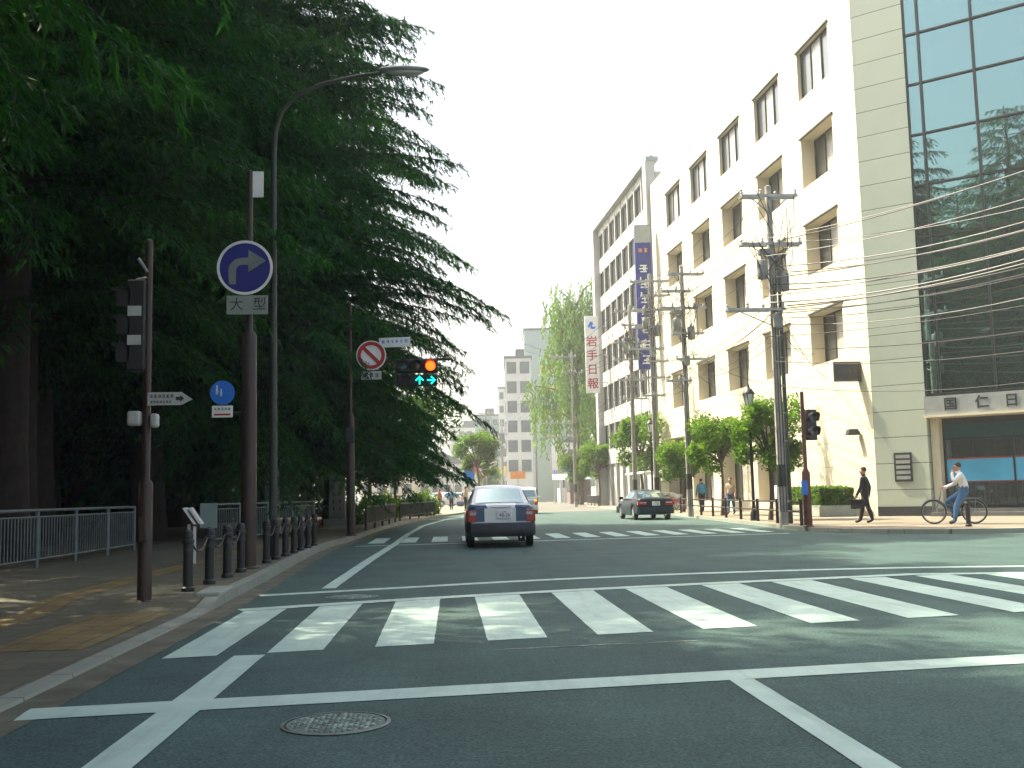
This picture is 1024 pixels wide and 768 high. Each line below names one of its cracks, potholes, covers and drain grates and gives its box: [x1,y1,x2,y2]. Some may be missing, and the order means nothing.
manhole cover [280,711,391,736]
